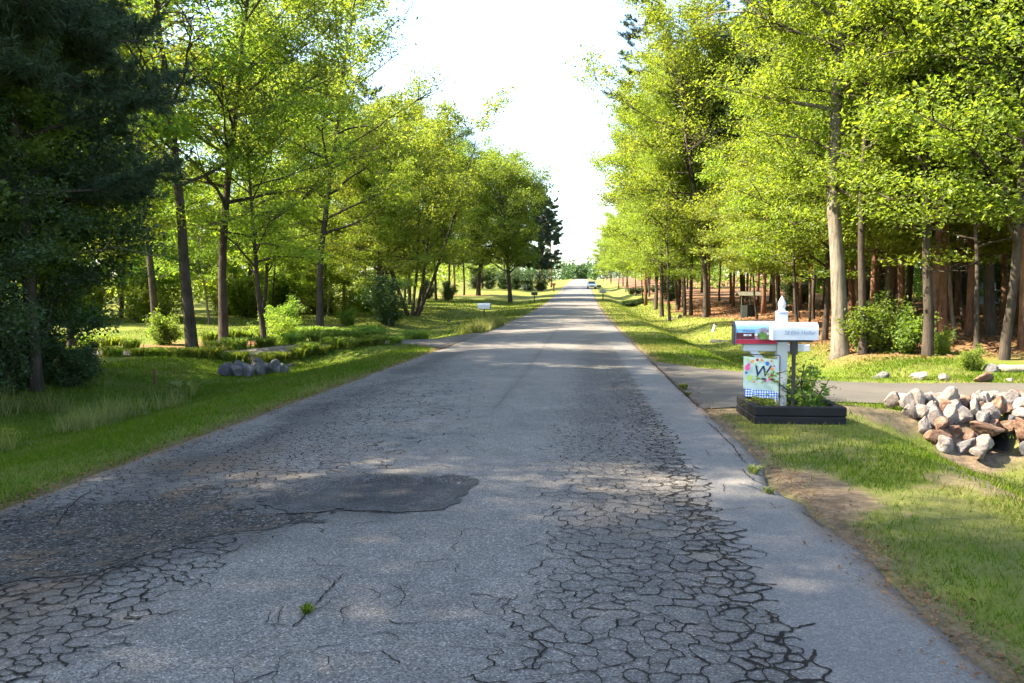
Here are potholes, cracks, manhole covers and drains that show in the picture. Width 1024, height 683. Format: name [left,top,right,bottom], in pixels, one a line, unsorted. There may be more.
crack [483,347,832,683]
crack [201,510,423,544]
crack [0,531,282,683]
crack [0,359,518,534]
crack [204,556,539,683]
